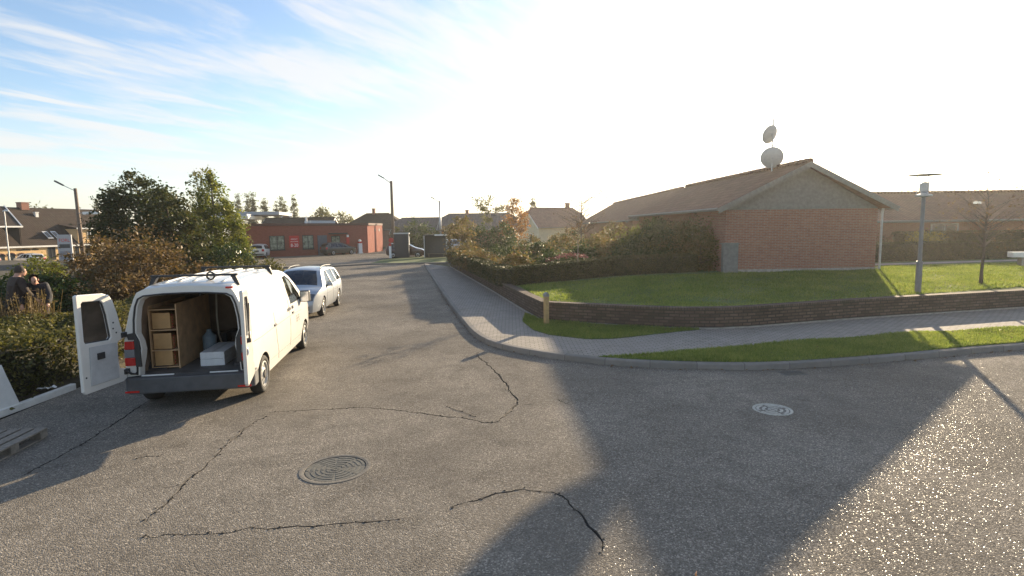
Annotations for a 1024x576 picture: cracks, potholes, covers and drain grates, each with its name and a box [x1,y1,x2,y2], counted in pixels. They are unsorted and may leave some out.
manhole cover [752,403,793,416]
crack [135,416,404,538]
manhole cover [299,454,371,484]
crack [269,352,532,423]
crack [451,487,605,556]
crack [17,403,145,478]
